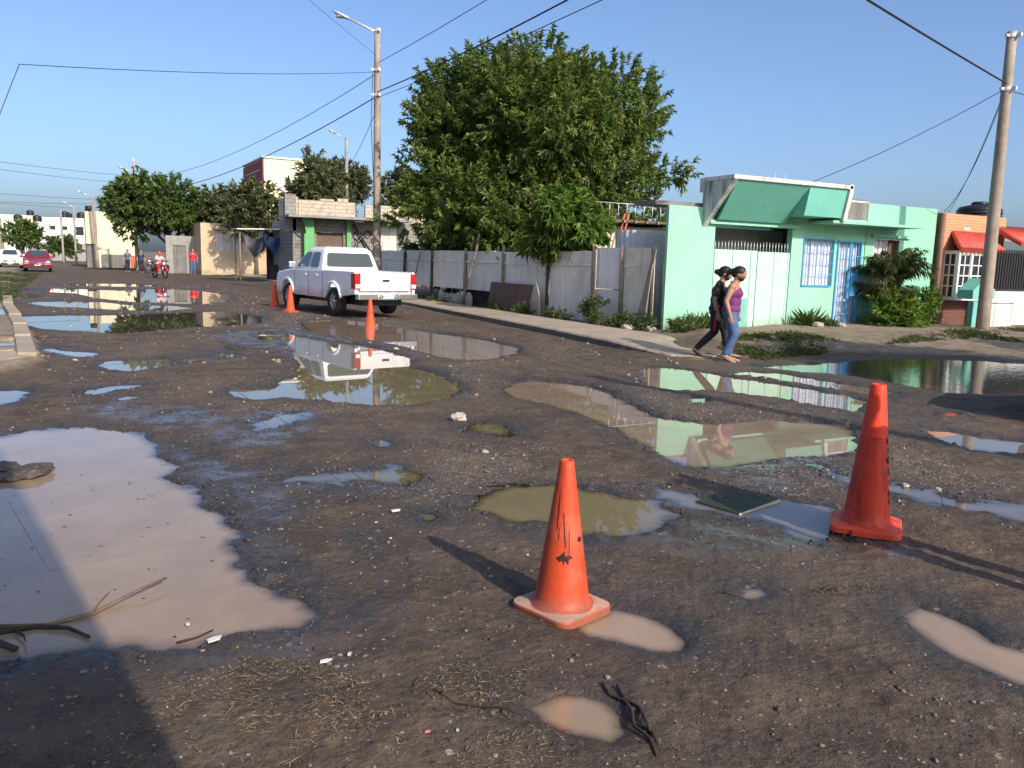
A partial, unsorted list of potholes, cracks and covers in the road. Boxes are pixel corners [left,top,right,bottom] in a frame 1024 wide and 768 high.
pothole [18,287,234,305]
pothole [296,318,525,360]
pothole [0,422,352,676]
manhole cover [696,488,780,517]
pothole [493,672,659,757]
pothole [218,328,472,406]
pothole [441,477,693,544]
pothole [15,300,194,311]
pothole [451,420,524,437]
pothole [748,357,1024,396]
pothole [724,370,907,399]
pothole [915,425,1024,455]
